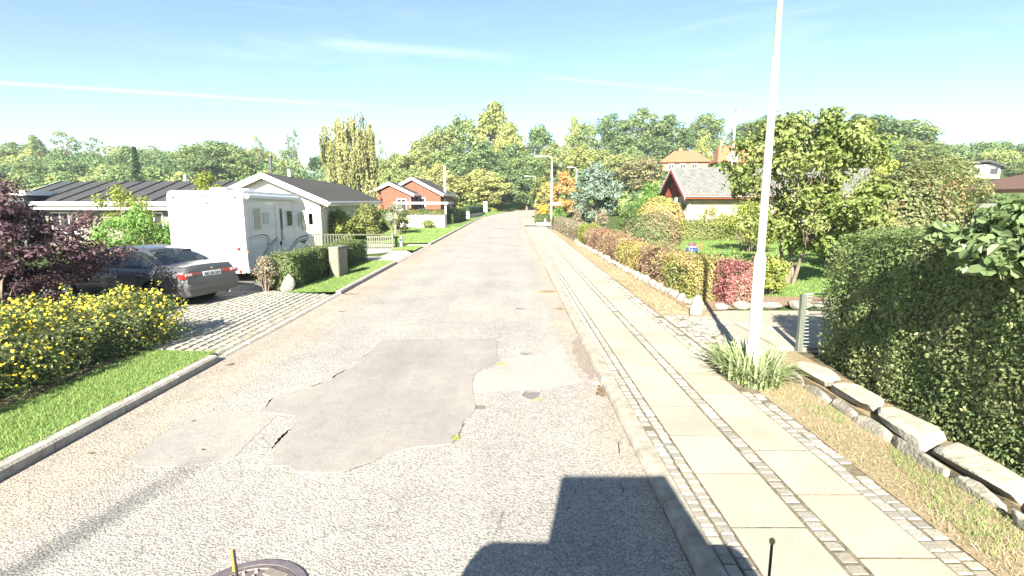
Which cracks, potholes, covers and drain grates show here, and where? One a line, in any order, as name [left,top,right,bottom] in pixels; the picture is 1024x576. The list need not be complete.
pothole [522,390,540,399]
manhole cover [212,559,307,576]
